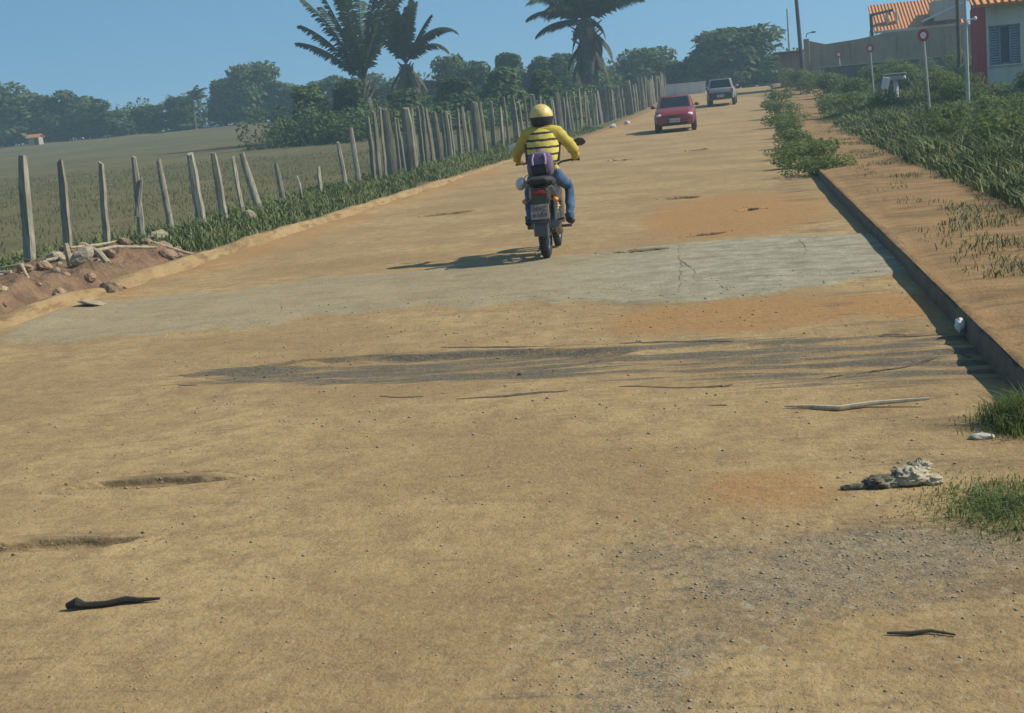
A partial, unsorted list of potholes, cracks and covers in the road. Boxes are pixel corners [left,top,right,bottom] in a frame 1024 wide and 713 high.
pothole [400,210,480,219]
pothole [0,530,168,562]
pothole [676,230,735,239]
crack [677,240,806,291]
pothole [37,470,257,497]
pothole [595,246,683,255]
